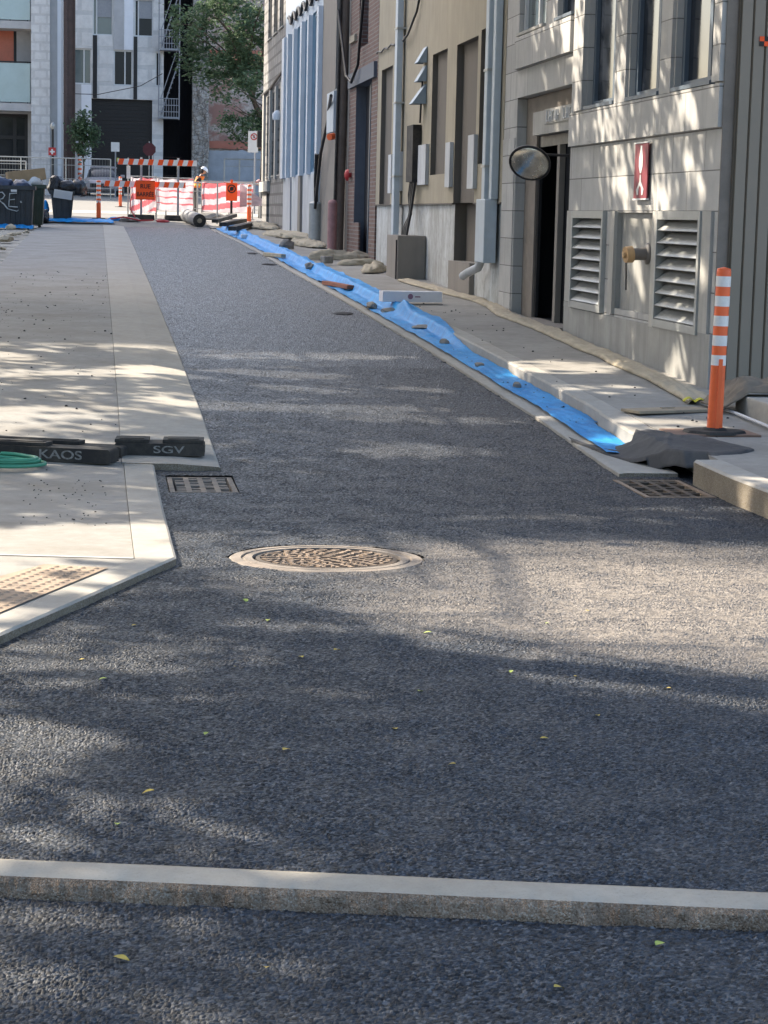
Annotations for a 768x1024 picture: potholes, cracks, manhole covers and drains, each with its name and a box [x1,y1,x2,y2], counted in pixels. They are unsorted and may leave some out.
drain grate [613,480,716,498]
manhole cover [229,545,424,573]
drain grate [166,477,239,493]
